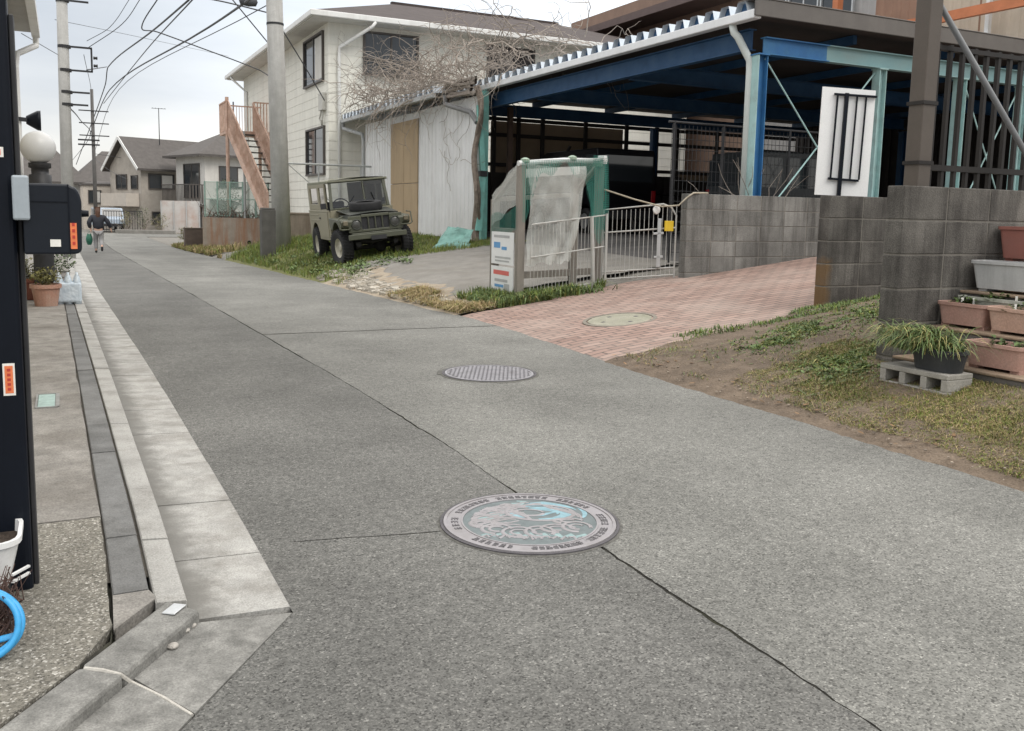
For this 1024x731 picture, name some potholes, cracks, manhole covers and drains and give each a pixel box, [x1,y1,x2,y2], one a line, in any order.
manhole cover [582,312,657,327]
manhole cover [437,365,539,383]
manhole cover [437,493,623,557]
